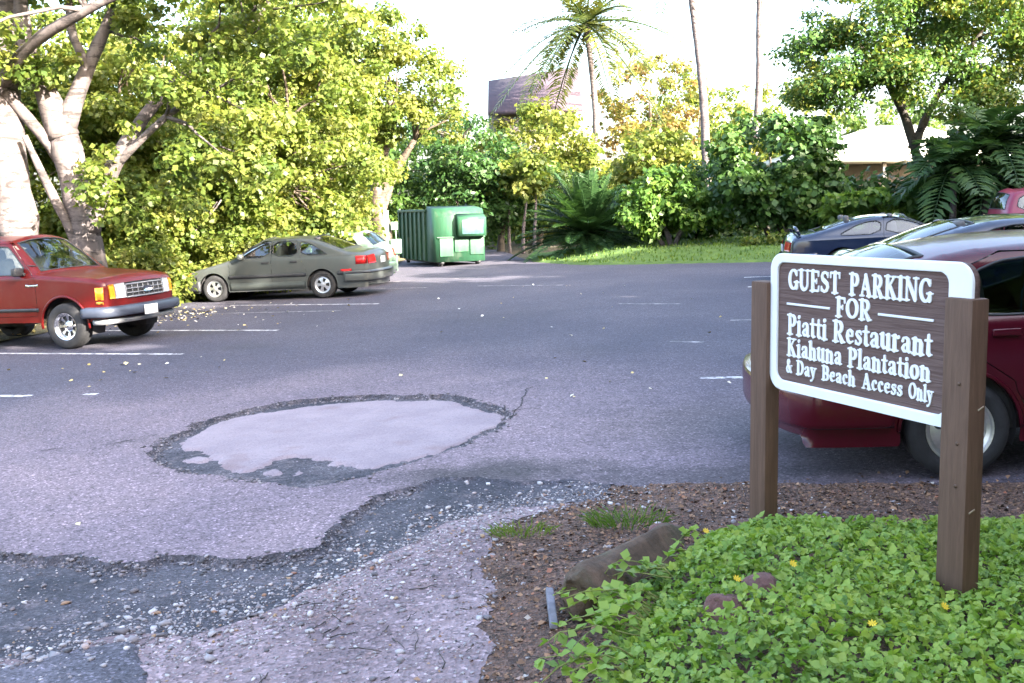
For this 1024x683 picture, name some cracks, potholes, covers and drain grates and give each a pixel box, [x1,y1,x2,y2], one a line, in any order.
pothole [0,476,611,660]
